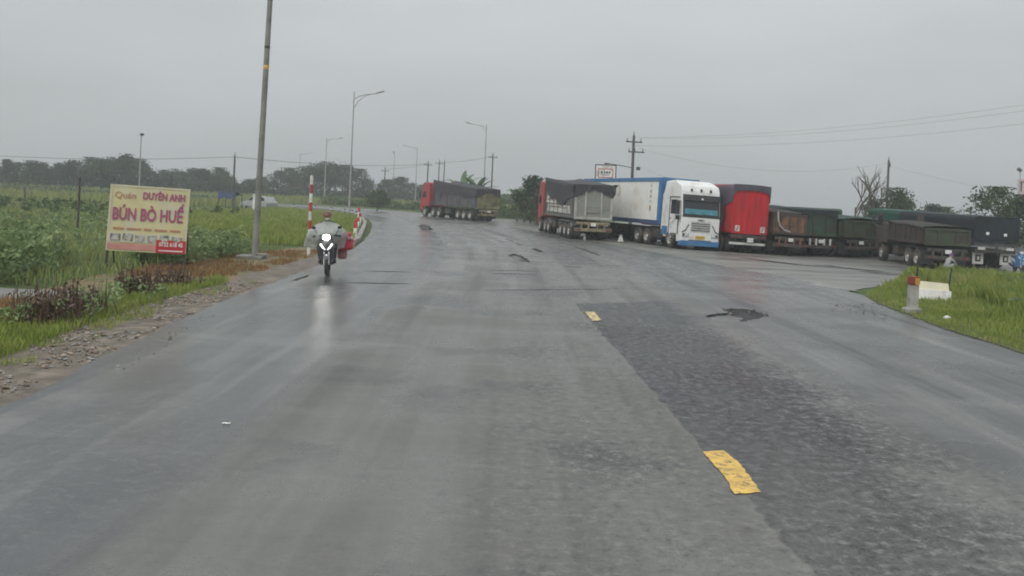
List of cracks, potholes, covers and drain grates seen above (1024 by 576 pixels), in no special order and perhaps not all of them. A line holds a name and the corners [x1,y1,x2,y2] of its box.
pothole [706,308,769,323]
